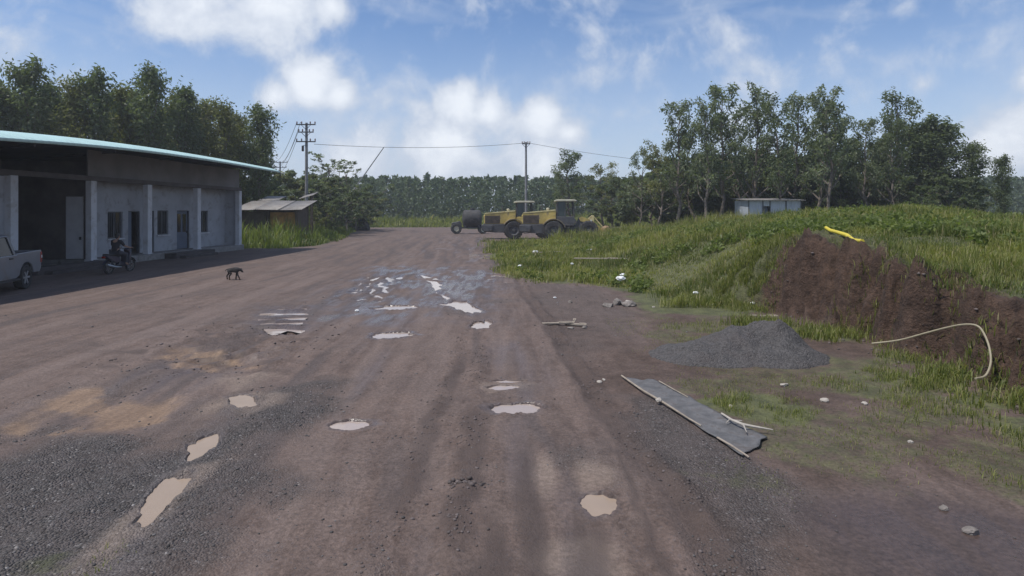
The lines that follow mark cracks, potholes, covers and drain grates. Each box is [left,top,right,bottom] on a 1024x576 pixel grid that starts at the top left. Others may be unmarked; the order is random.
pothole [360,329,432,341]
pothole [314,416,389,434]
pothole [219,391,270,414]
pothole [473,383,532,393]
pothole [564,485,631,527]
pothole [460,316,502,332]
pothole [173,422,232,471]
pothole [476,399,558,417]
pothole [415,296,506,322]
